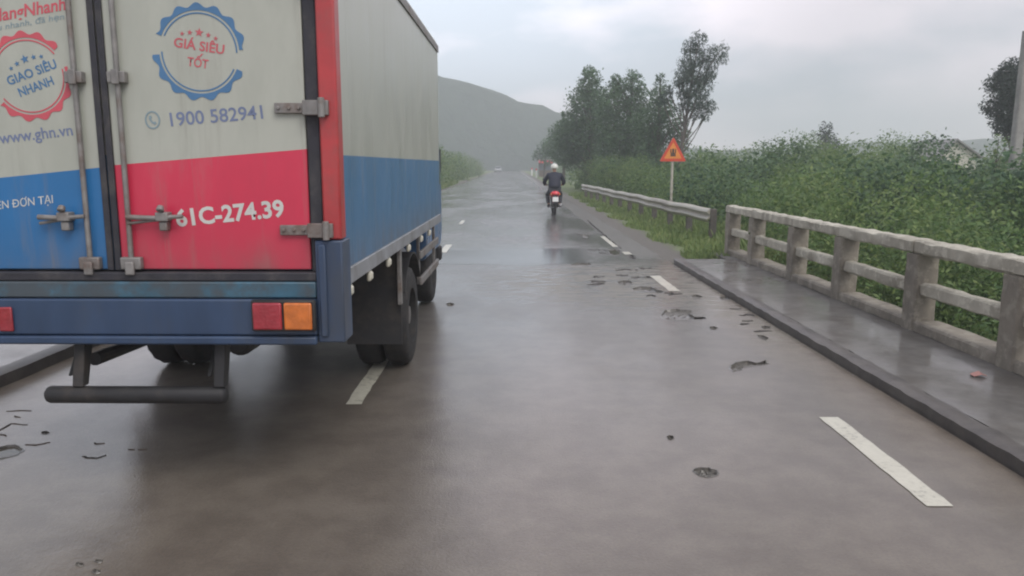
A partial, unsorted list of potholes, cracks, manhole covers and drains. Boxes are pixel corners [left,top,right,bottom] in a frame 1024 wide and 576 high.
pothole [692,467,719,478]
crack [0,410,50,446]
crack [82,442,106,459]
pothole [631,286,665,294]
pothole [0,444,25,459]
pothole [728,360,770,372]
pothole [660,309,707,321]
